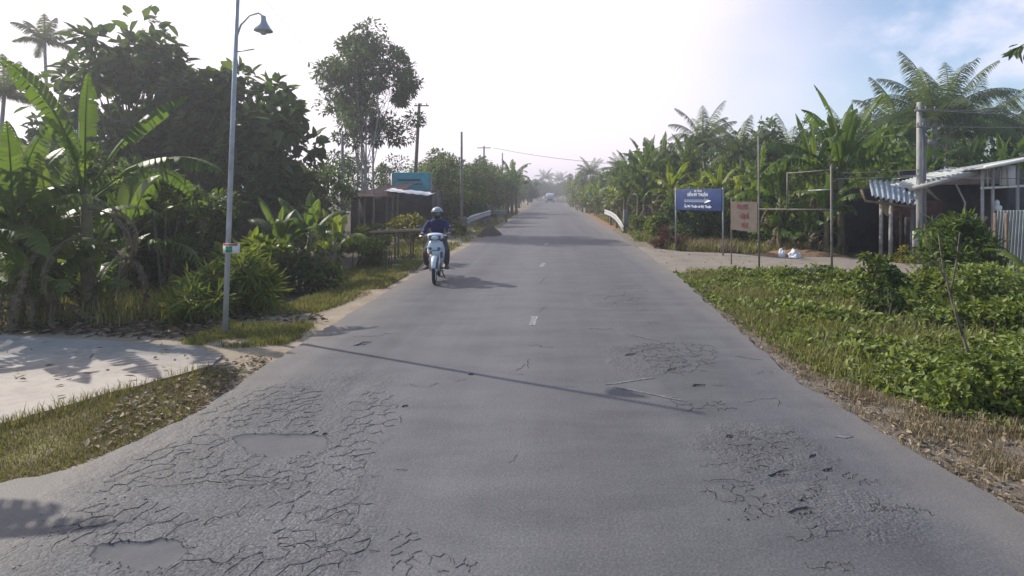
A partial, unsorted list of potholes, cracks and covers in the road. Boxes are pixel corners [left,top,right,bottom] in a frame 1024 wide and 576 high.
pothole [88,537,189,572]
pothole [232,433,330,458]
crack [49,383,477,576]
crack [700,431,934,517]
crack [625,342,782,411]
crack [803,560,854,572]
crack [508,344,552,375]
crack [786,523,843,542]
